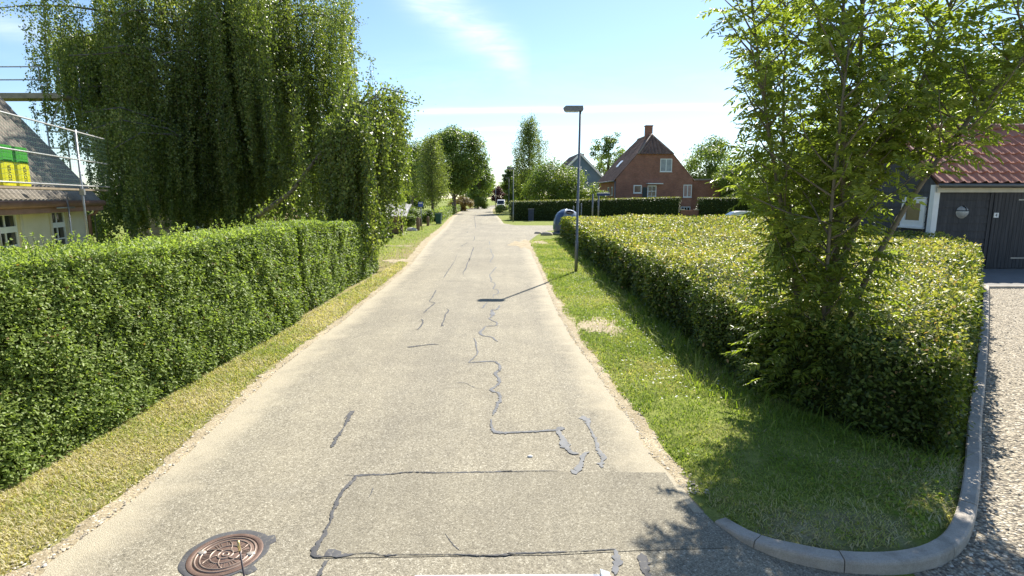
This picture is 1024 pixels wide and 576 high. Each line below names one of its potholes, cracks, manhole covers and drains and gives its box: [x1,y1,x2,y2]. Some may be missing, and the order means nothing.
manhole cover [178,530,276,576]
